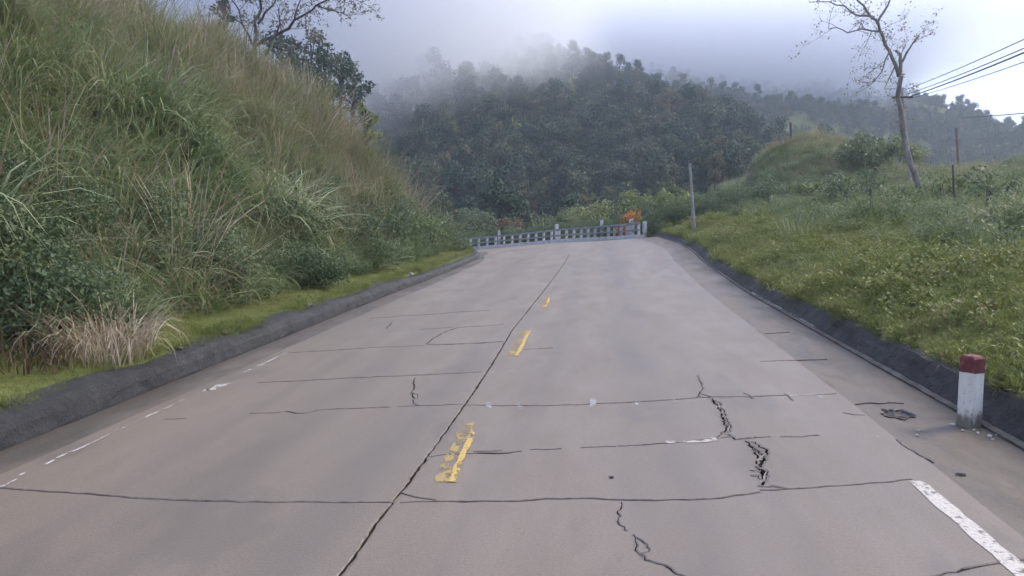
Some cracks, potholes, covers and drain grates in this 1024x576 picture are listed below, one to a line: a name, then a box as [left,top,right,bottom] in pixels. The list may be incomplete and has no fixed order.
pothole [880,408,916,421]
crack [0,255,935,576]
